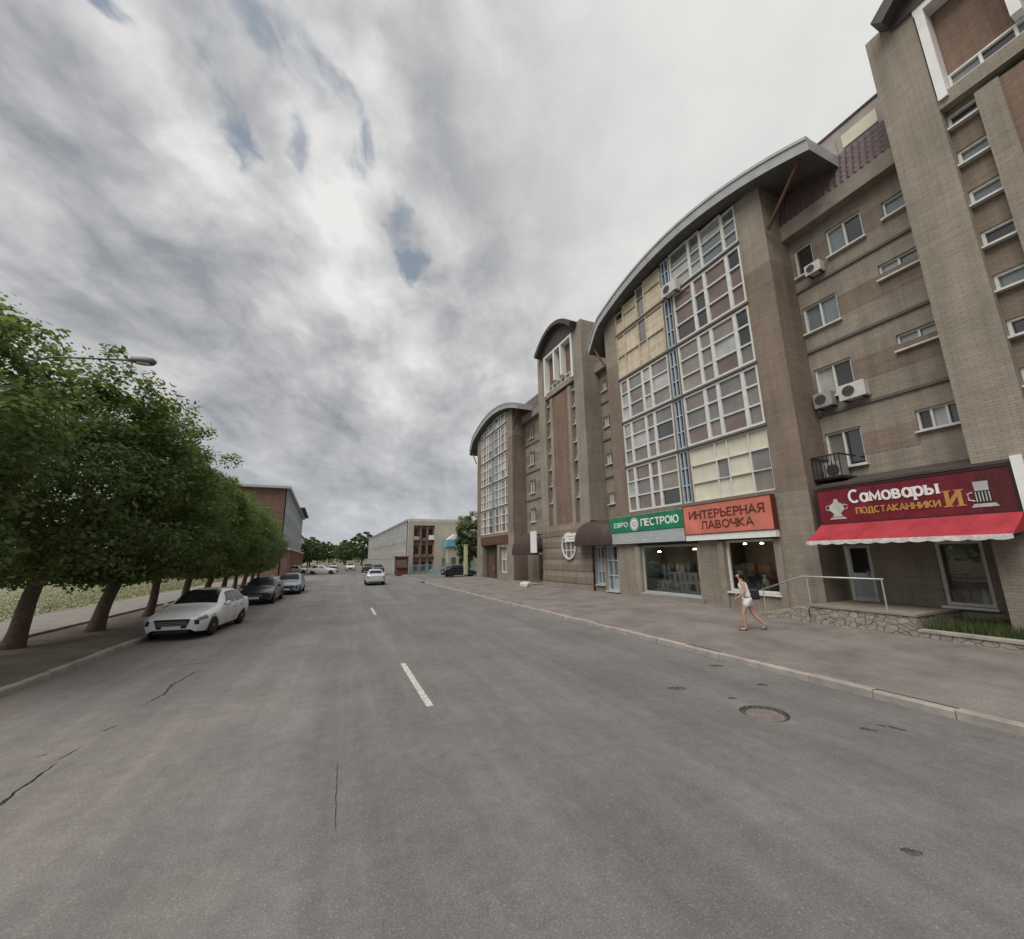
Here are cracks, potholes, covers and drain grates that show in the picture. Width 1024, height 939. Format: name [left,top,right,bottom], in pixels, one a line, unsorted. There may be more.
crack [144,661,216,705]
crack [0,748,80,806]
manhole cover [739,705,791,722]
